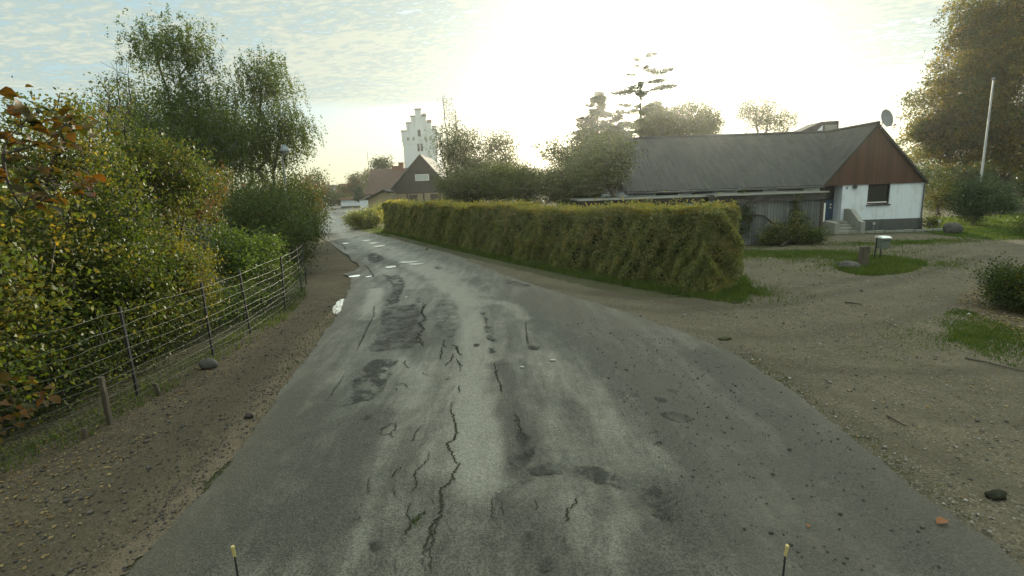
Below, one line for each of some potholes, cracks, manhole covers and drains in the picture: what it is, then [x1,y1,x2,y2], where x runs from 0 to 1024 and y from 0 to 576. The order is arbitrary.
crack [379,297,463,572]
